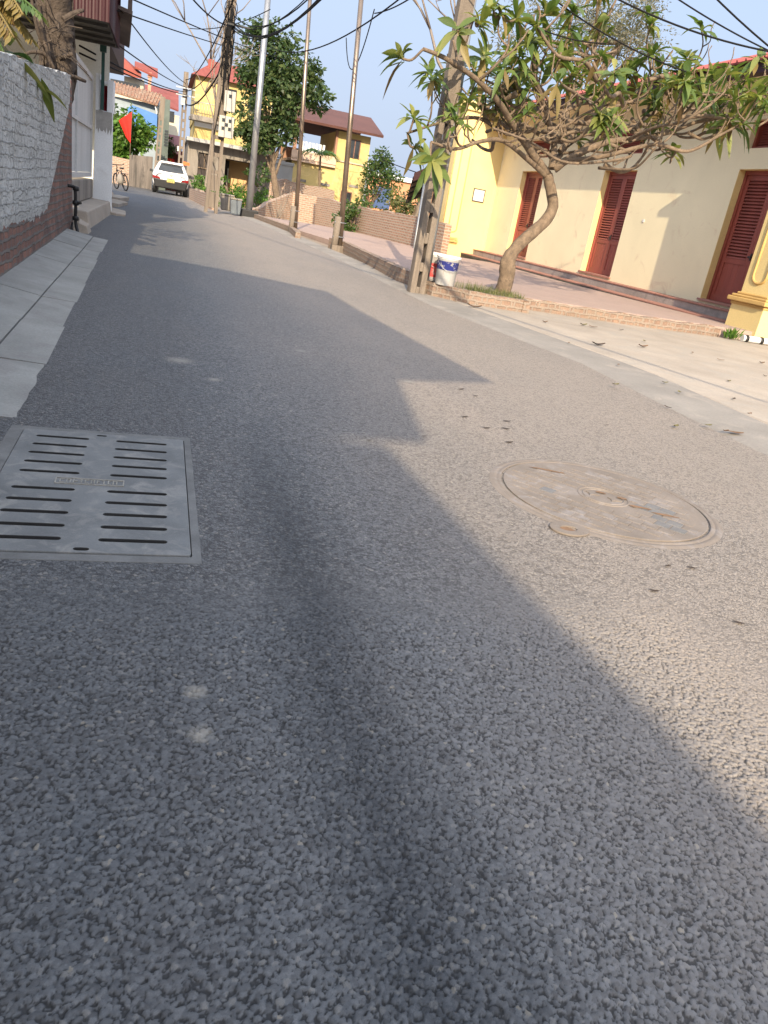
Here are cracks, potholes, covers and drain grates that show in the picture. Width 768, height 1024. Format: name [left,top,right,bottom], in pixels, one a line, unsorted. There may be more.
manhole cover [489,459,723,549]
